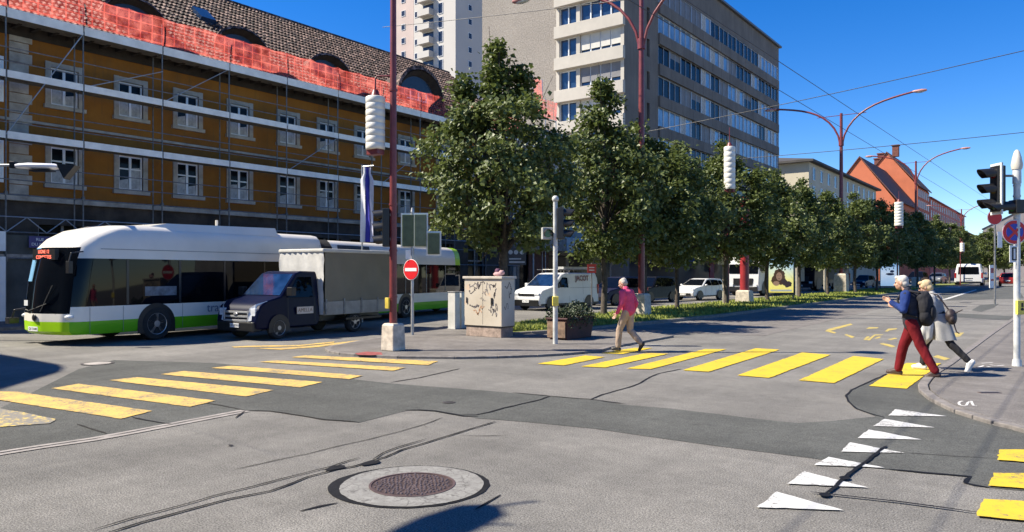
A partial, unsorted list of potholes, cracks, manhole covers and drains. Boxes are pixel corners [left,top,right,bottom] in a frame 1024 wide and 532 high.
manhole cover [300,465,500,511]
